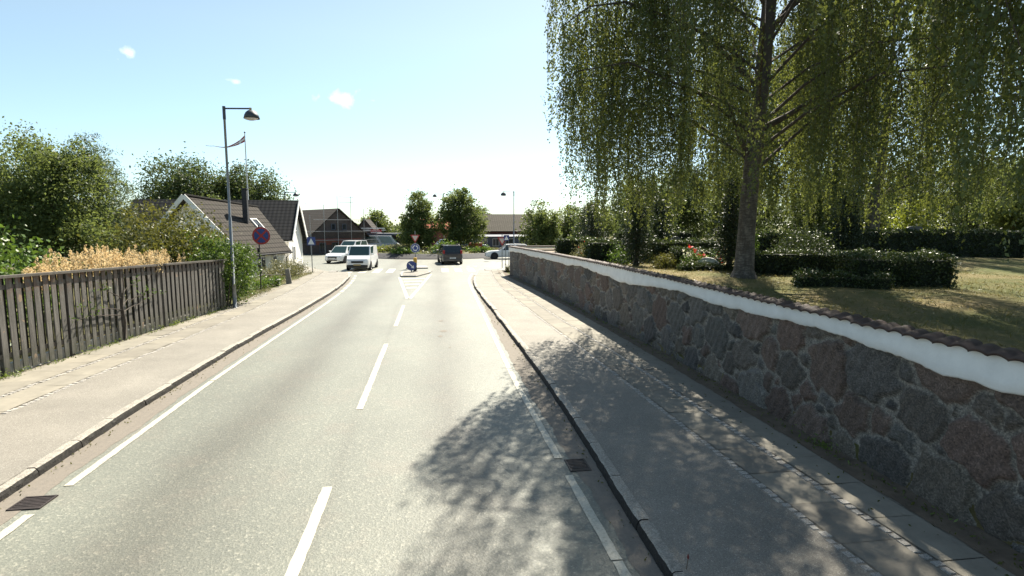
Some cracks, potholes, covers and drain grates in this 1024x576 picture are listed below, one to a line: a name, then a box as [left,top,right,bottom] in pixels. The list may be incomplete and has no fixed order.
drain grate [6,495,59,511]
drain grate [564,458,592,472]
